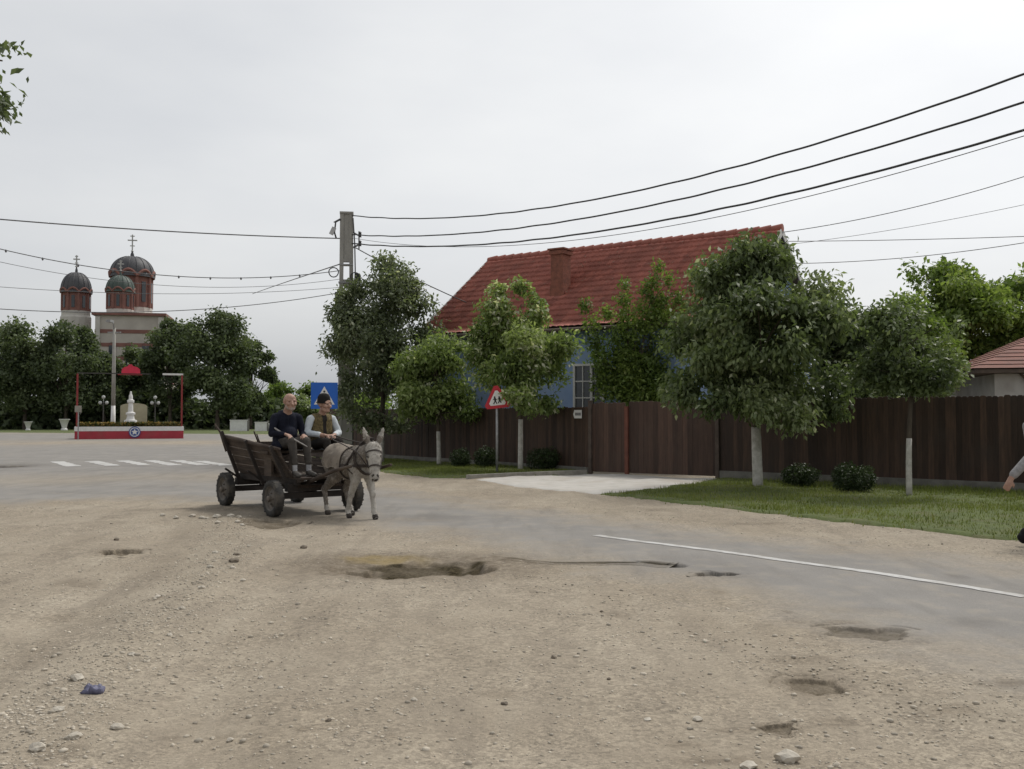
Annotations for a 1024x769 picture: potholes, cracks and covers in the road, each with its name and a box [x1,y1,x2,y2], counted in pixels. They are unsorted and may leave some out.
pothole [806,624,935,644]
pothole [771,675,858,698]
pothole [752,722,807,738]
crack [500,557,679,568]
pothole [88,548,150,558]
